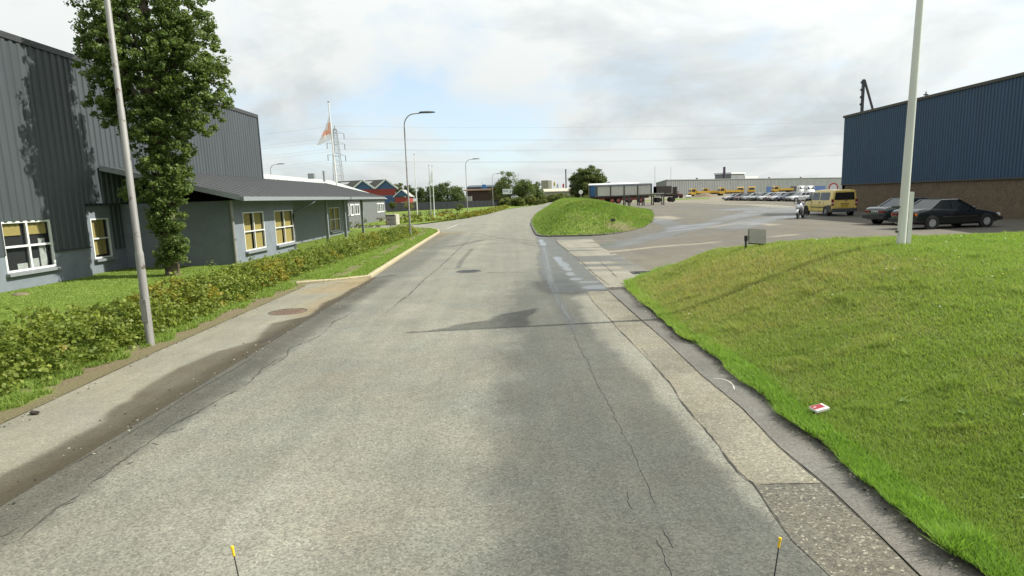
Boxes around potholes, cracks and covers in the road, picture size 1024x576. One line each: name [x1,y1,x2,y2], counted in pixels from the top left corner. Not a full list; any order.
crack [544,255,687,576]
crack [387,238,471,312]
